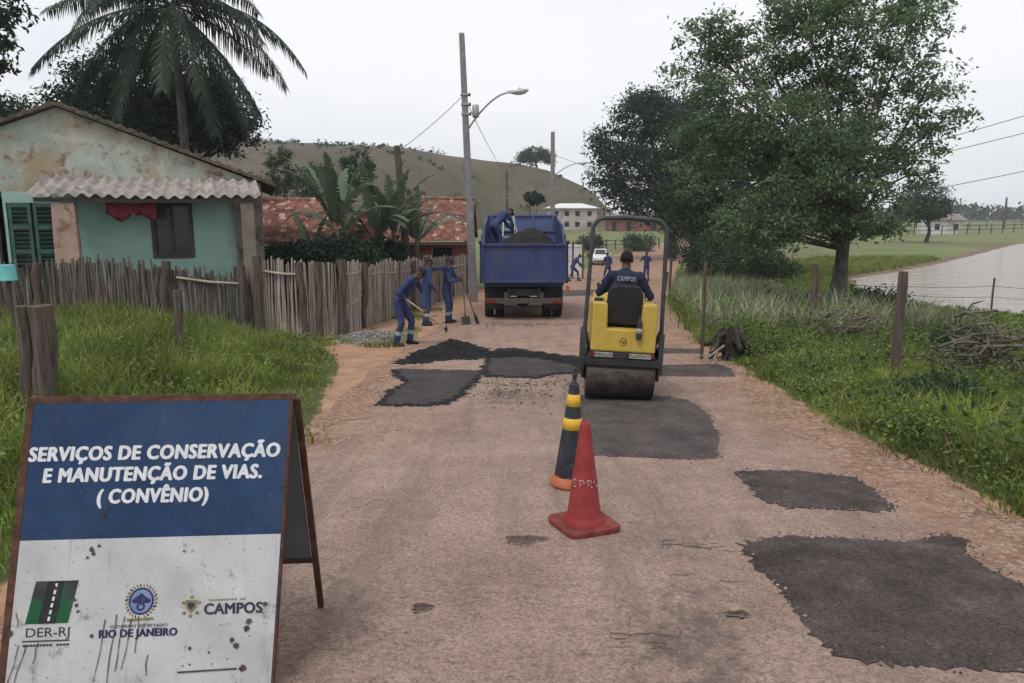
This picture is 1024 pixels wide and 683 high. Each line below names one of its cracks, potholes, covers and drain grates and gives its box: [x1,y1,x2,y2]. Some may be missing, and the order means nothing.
pothole [725,610,751,619]
pothole [411,603,436,614]
crack [603,614,703,649]
pothole [502,535,552,545]
